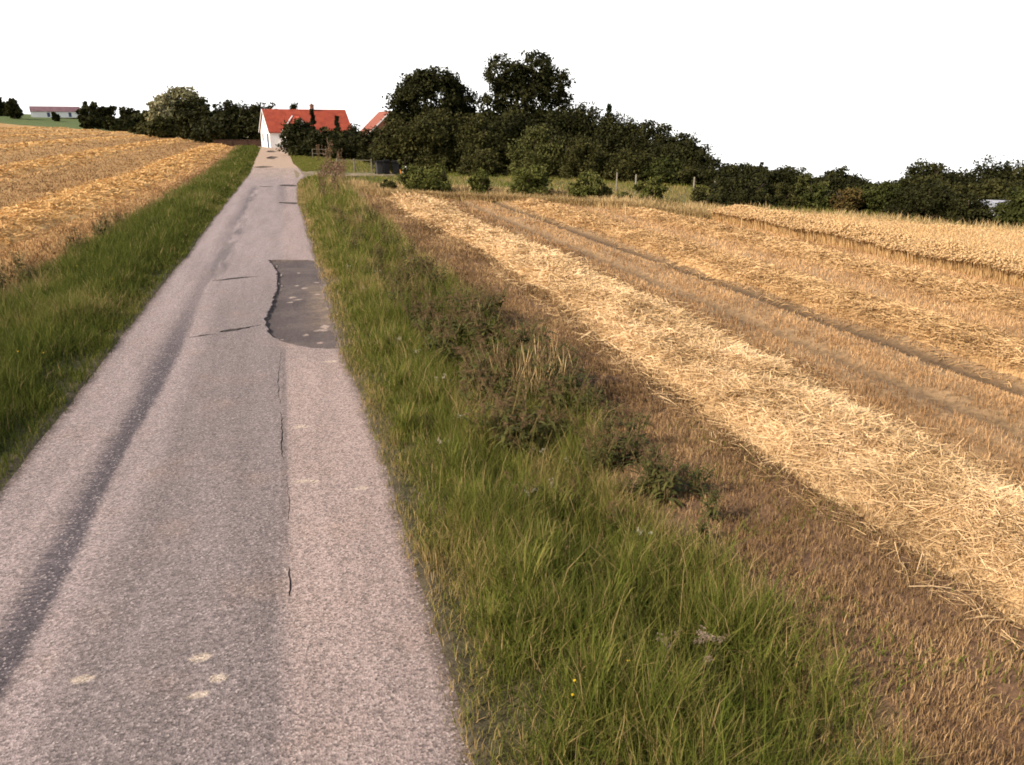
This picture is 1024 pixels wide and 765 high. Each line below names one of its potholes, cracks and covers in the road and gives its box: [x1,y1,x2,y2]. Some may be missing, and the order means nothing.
crack [189,325,259,338]
crack [277,357,302,596]
